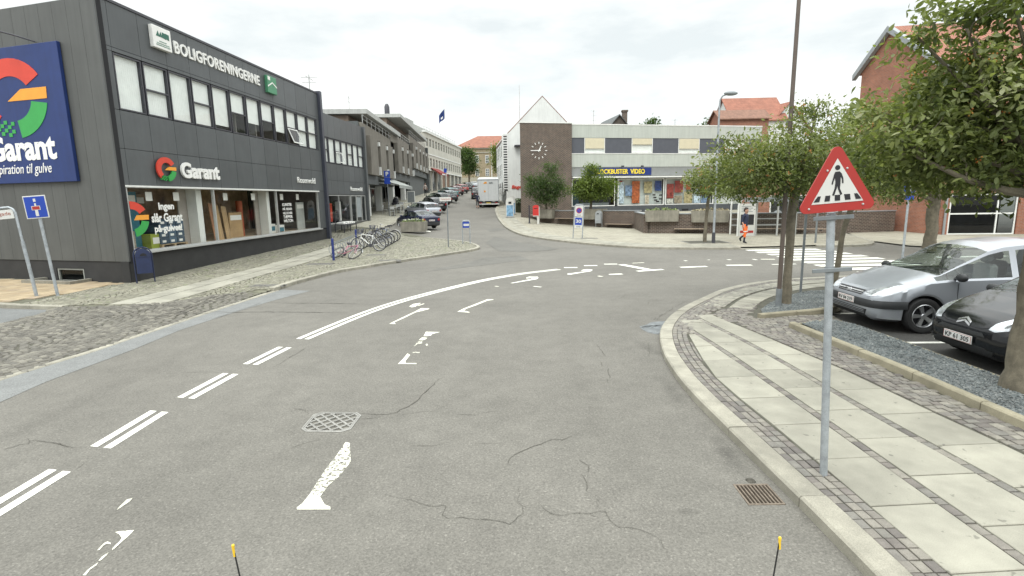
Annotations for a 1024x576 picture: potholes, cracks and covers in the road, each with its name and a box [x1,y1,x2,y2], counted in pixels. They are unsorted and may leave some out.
crack [390,488,665,548]
drain grate [733,484,786,505]
